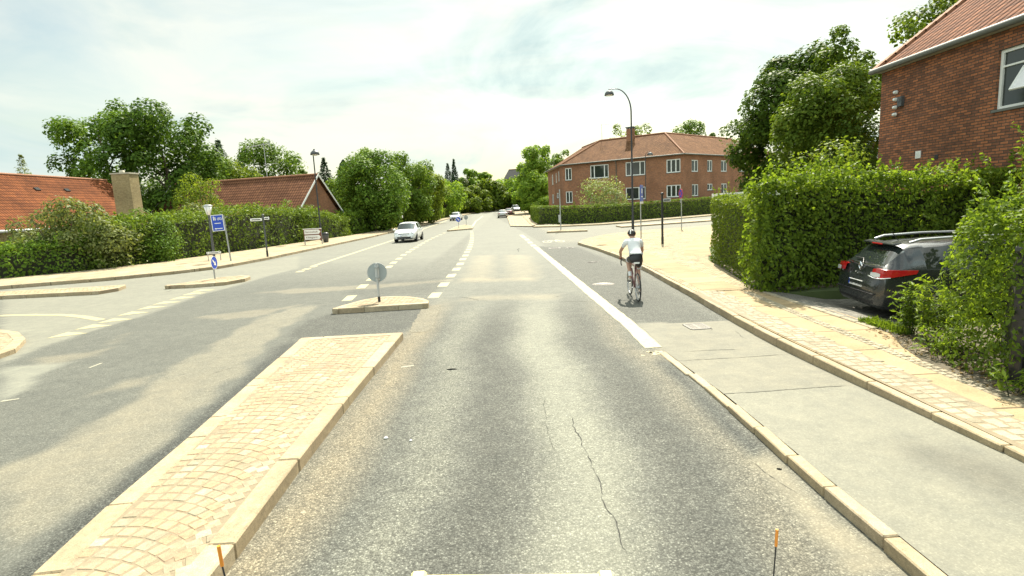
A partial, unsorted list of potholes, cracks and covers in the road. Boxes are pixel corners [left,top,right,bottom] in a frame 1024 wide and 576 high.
crack [572,418,628,554]
